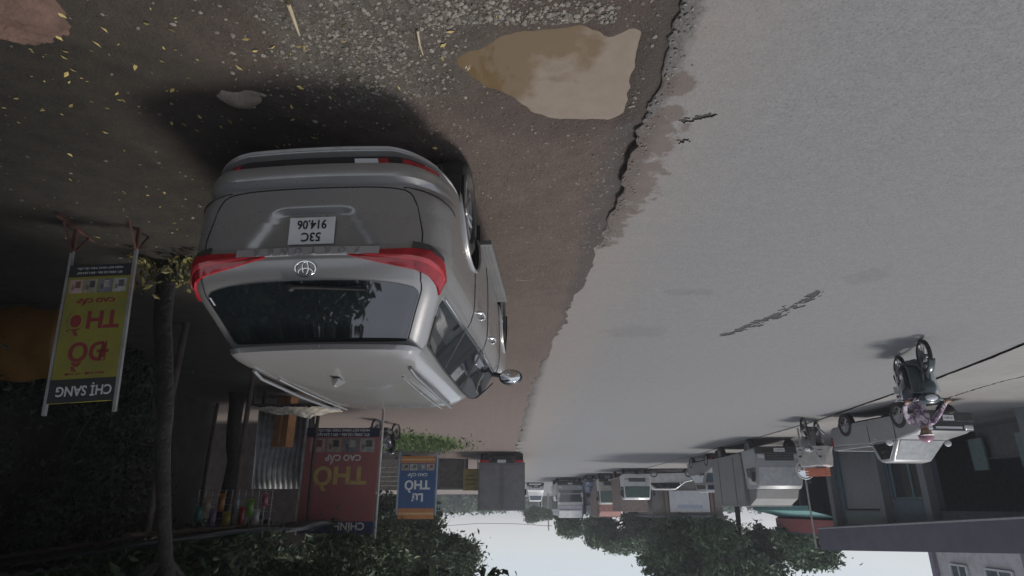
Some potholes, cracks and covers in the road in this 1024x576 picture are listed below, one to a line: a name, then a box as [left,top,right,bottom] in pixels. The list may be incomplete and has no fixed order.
crack [719,290,824,336]
pothole [439,11,660,132]
